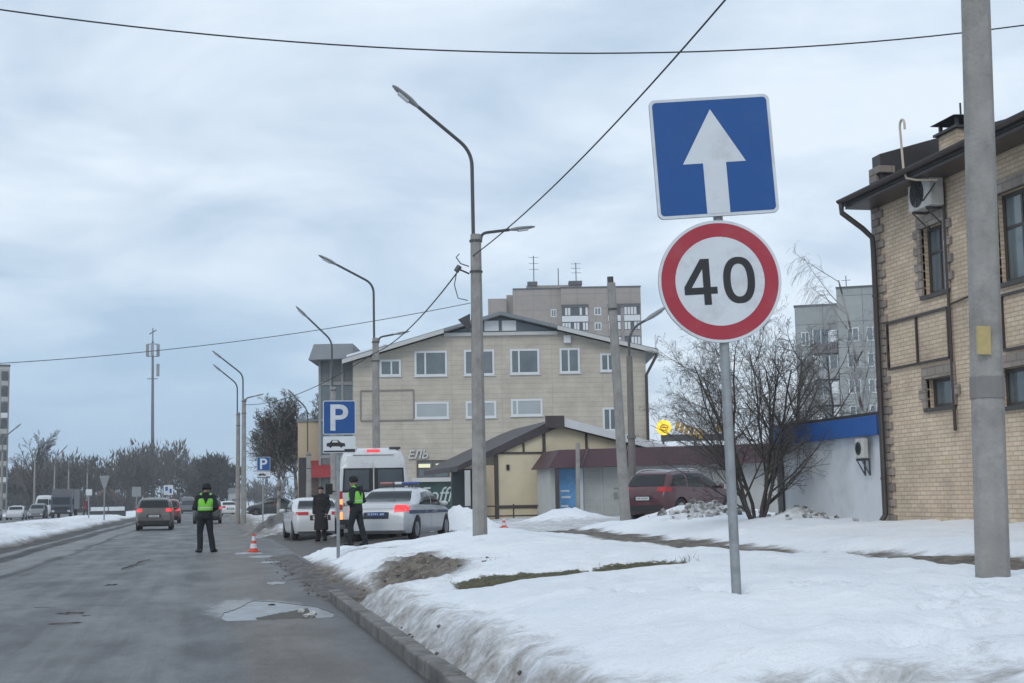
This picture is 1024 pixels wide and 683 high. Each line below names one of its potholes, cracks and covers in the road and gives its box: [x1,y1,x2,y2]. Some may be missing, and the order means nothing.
pothole [221,601,334,621]
